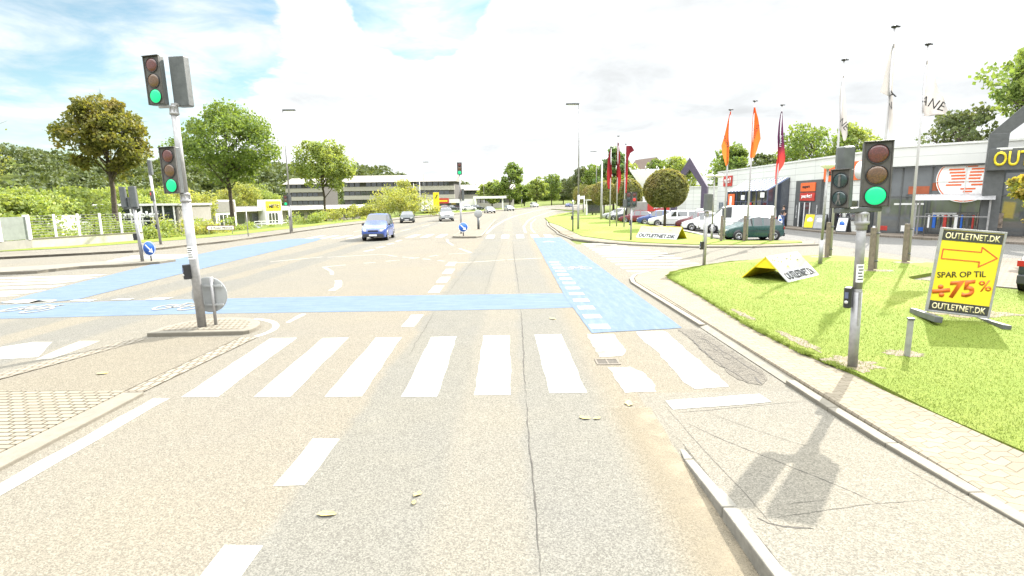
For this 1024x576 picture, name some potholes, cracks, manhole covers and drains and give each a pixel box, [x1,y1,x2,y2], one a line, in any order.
crack [512,242,541,575]
